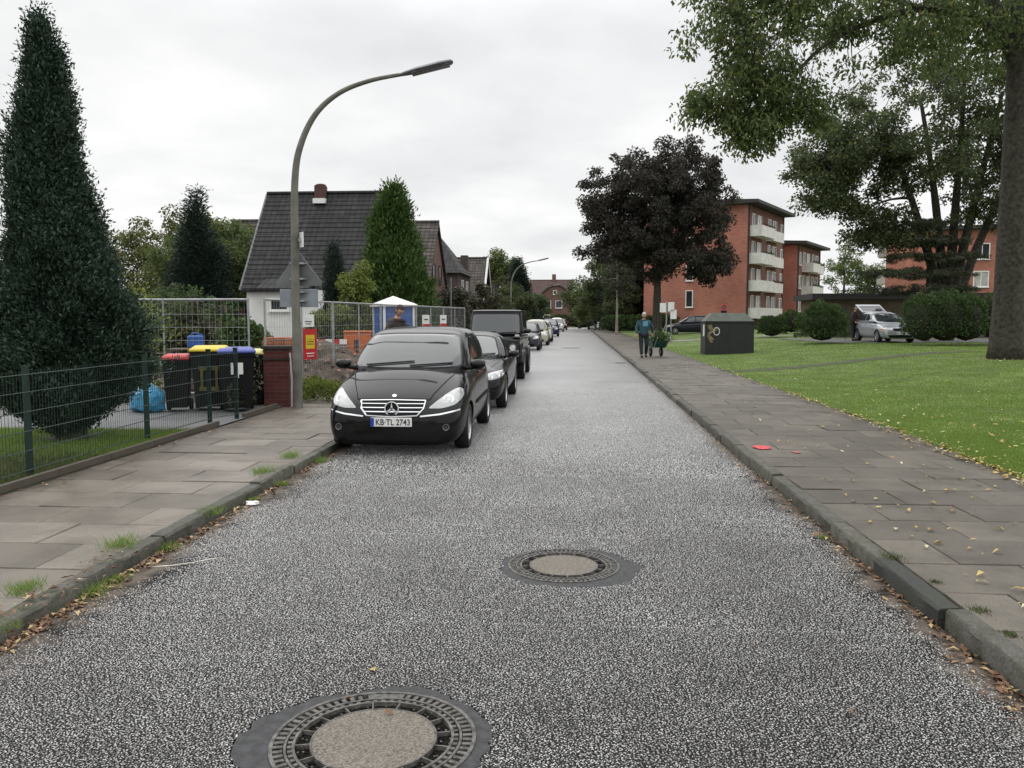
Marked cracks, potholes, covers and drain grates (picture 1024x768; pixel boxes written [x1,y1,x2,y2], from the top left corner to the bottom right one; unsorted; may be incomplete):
manhole cover [230,685,494,768]
manhole cover [500,549,645,588]
